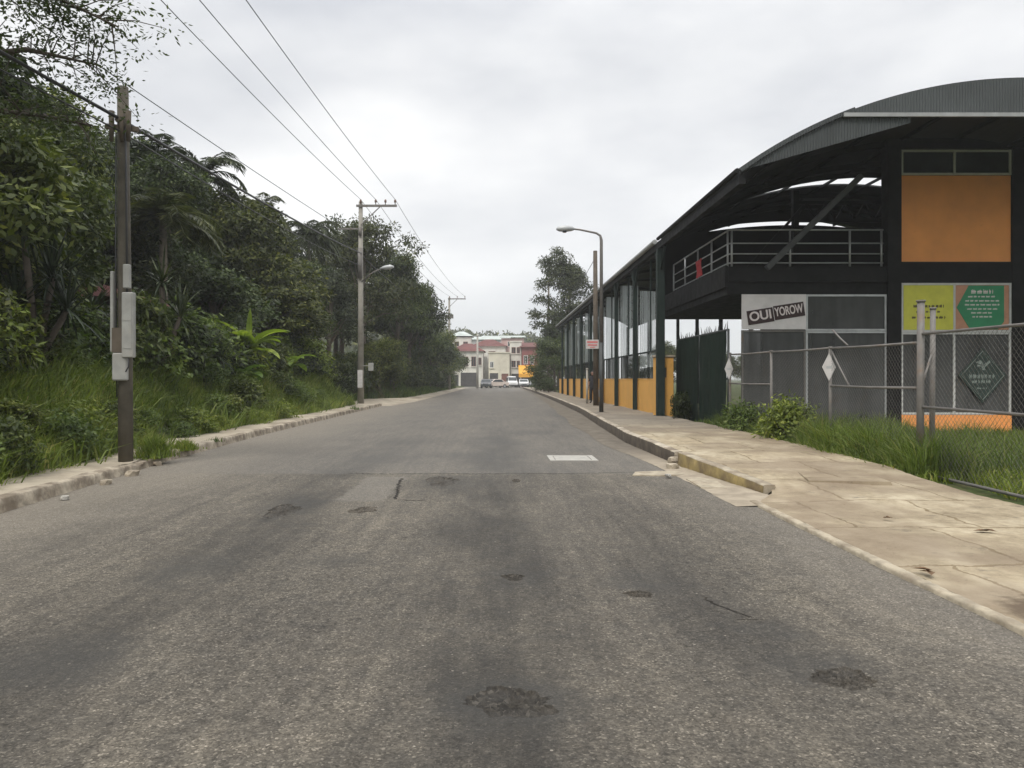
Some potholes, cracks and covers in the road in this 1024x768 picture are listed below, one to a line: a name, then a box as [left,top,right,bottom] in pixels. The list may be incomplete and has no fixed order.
pothole [441,678,581,729]
pothole [420,475,466,488]
pothole [339,505,386,515]
crack [691,594,767,620]
crack [387,478,429,502]
pothole [258,503,310,520]
pothole [787,660,900,700]
